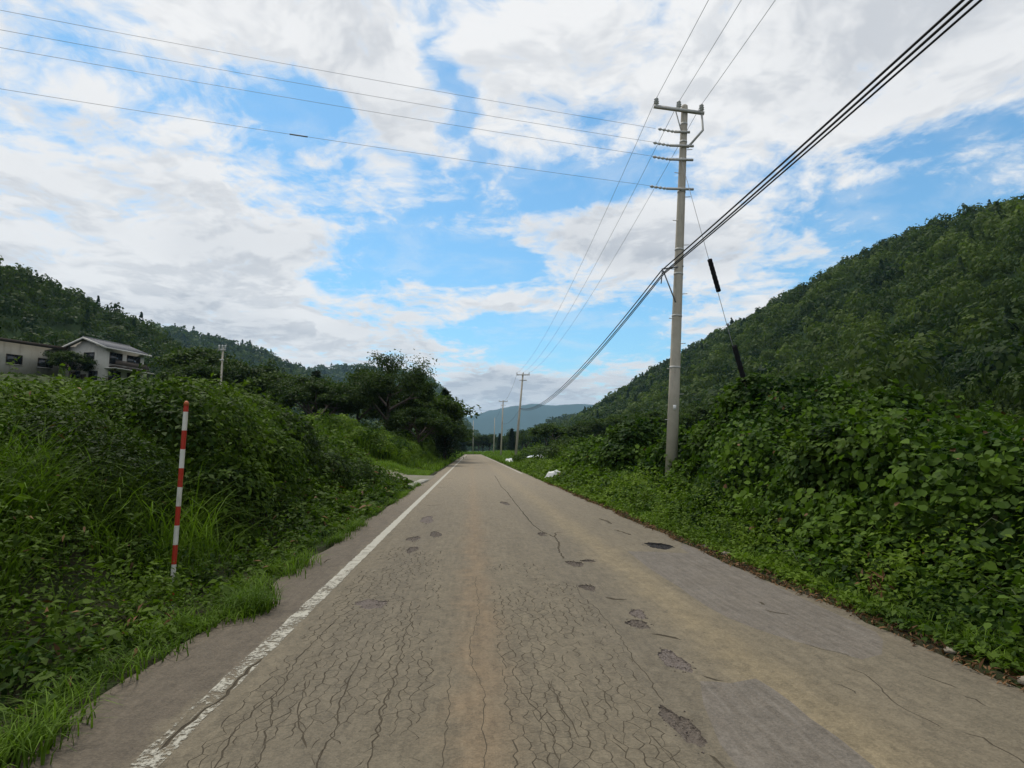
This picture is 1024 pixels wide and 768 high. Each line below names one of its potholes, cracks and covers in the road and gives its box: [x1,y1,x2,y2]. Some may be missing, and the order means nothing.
crack [964,732,1024,763]
pothole [644,542,675,550]
pothole [658,704,708,748]
pothole [355,599,387,609]
pothole [625,619,651,629]
pothole [629,609,646,619]
crack [486,561,686,768]
crack [469,584,487,767]
crack [806,644,986,728]
pothole [657,649,693,673]
